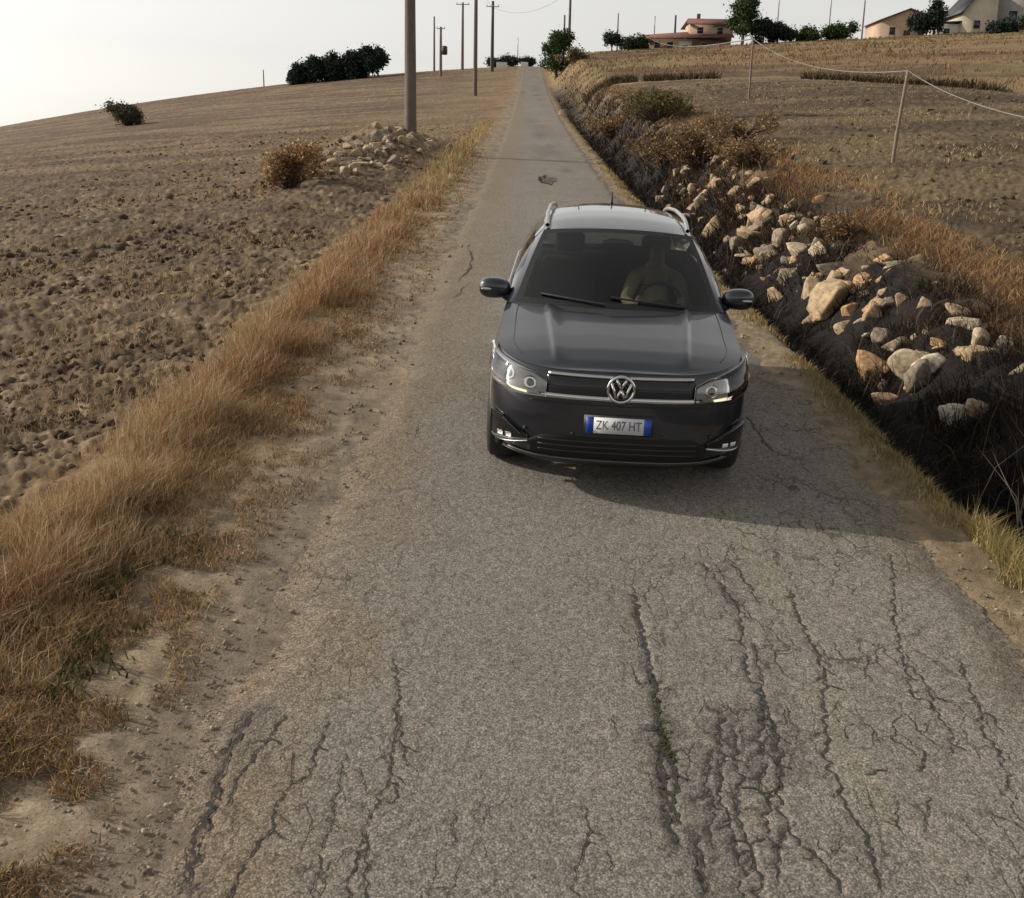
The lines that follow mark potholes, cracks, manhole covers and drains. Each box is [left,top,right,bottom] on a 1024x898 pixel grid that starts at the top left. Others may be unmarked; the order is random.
crack [632,558,844,898]
crack [184,657,418,898]
crack [889,554,1017,800]
crack [452,244,473,298]
